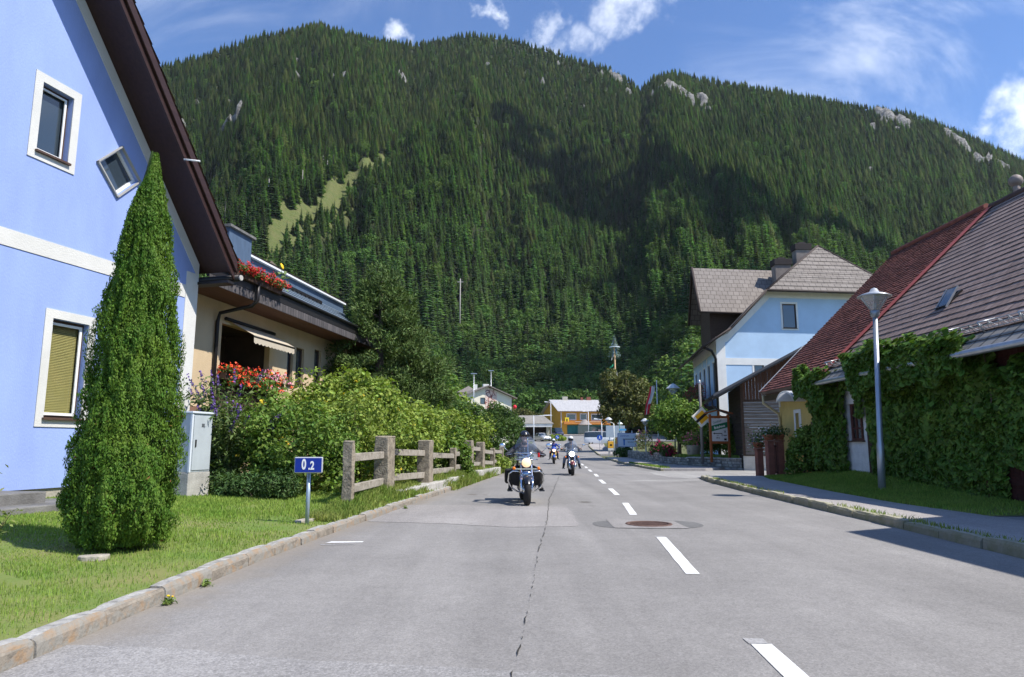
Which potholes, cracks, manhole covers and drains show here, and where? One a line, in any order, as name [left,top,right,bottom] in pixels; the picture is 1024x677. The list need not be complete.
crack [510,477,559,677]
